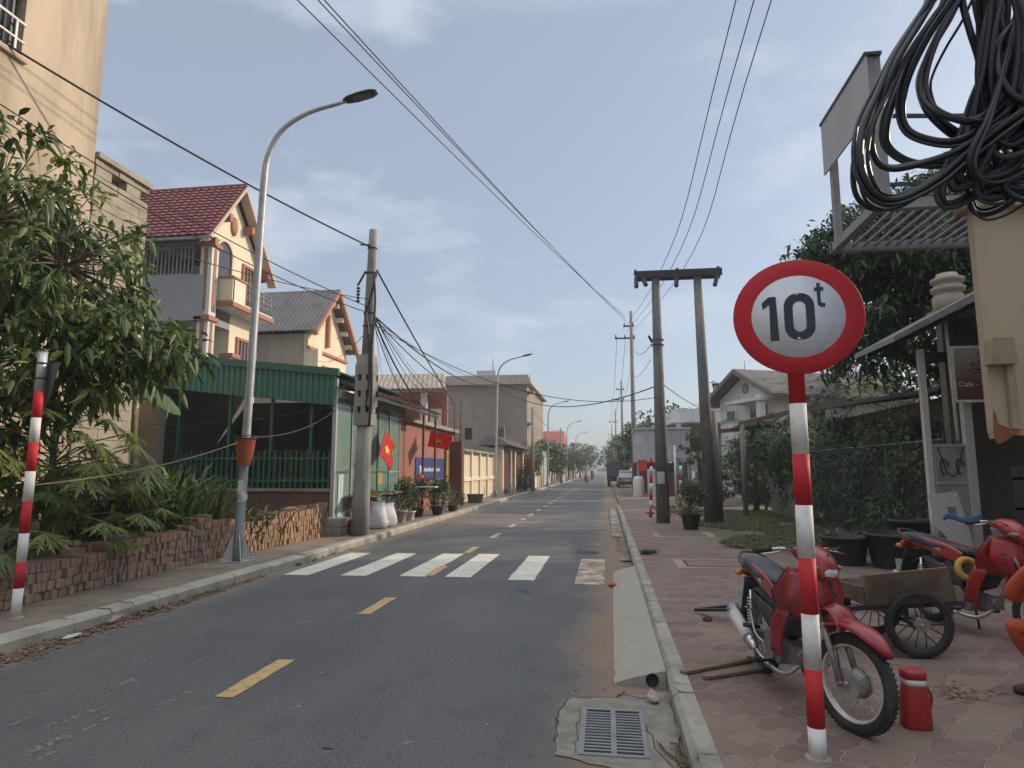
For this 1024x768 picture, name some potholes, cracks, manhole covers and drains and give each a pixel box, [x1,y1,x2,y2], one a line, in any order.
drain grate [577,707,650,760]
manhole cover [671,558,742,569]
